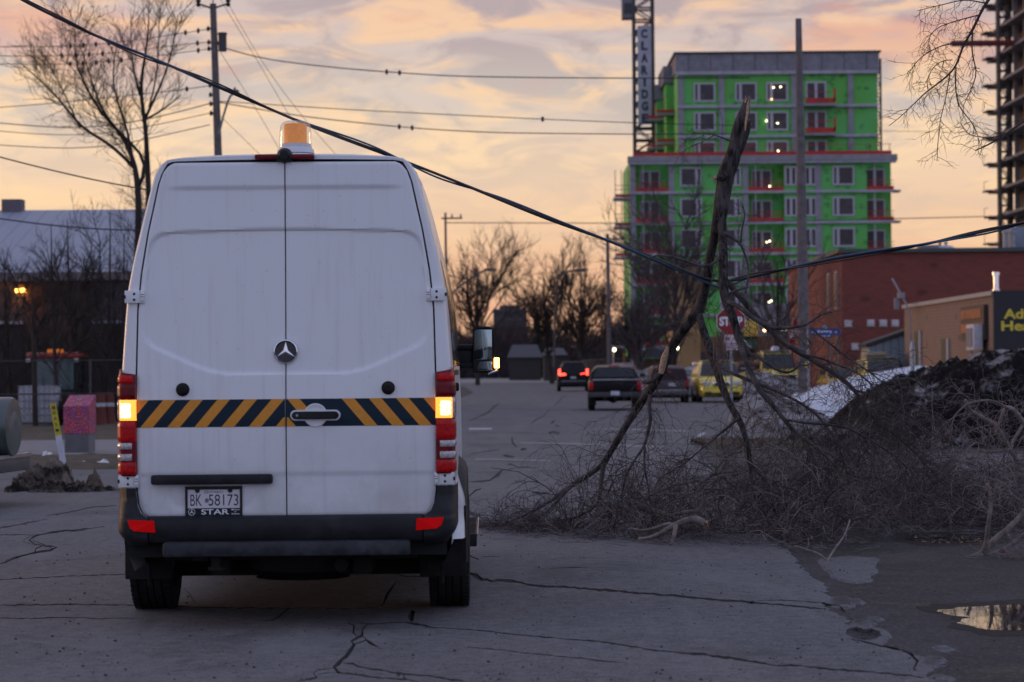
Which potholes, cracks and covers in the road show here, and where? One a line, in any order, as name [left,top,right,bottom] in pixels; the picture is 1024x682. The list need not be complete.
pothole [846,627,881,640]
crack [3,555,925,682]
crack [0,505,125,580]
